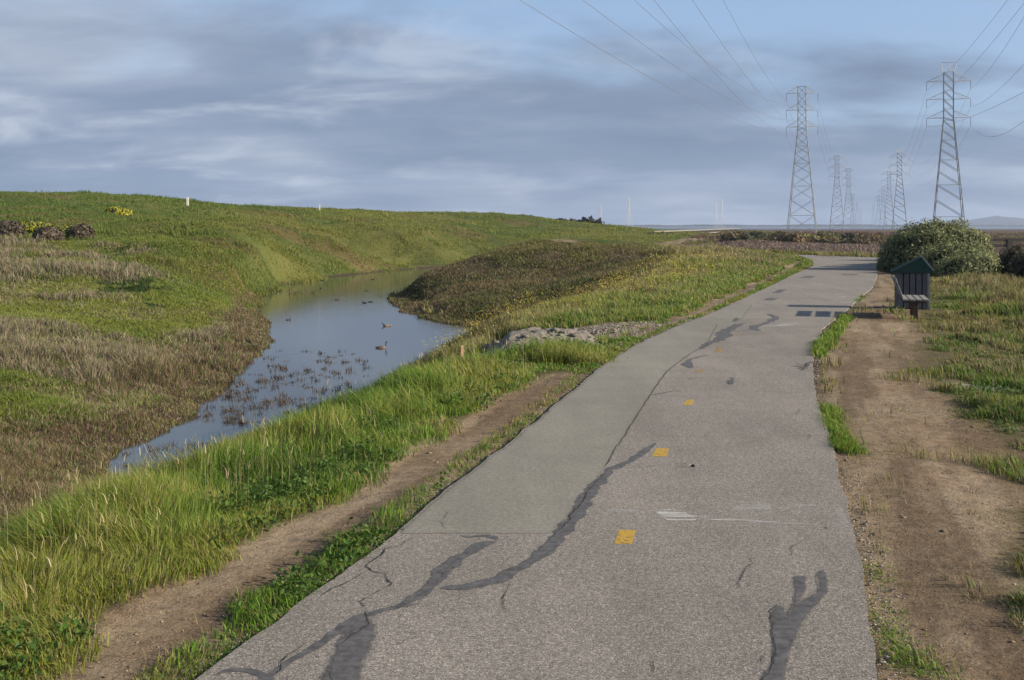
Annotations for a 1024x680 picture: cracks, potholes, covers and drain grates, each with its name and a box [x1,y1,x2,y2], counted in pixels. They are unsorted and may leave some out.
crack [322,537,414,607]
